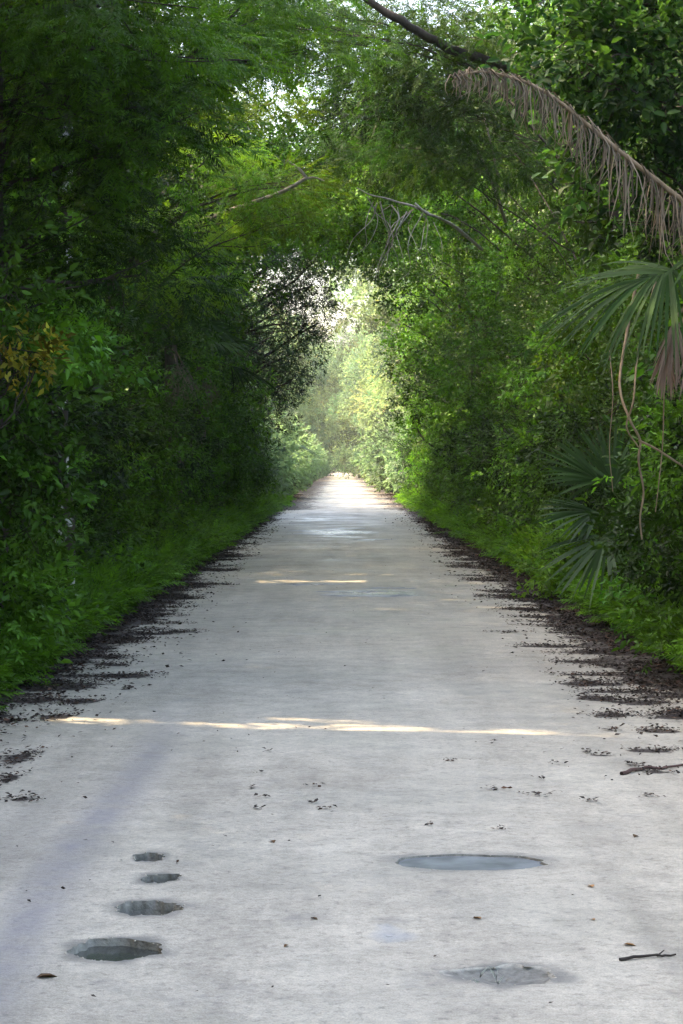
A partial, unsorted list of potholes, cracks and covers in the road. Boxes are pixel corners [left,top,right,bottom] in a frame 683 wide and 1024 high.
pothole [114,900,185,916]
pothole [138,874,182,884]
pothole [439,963,557,985]
pothole [392,854,552,871]
pothole [131,852,166,862]
pothole [65,937,162,962]
